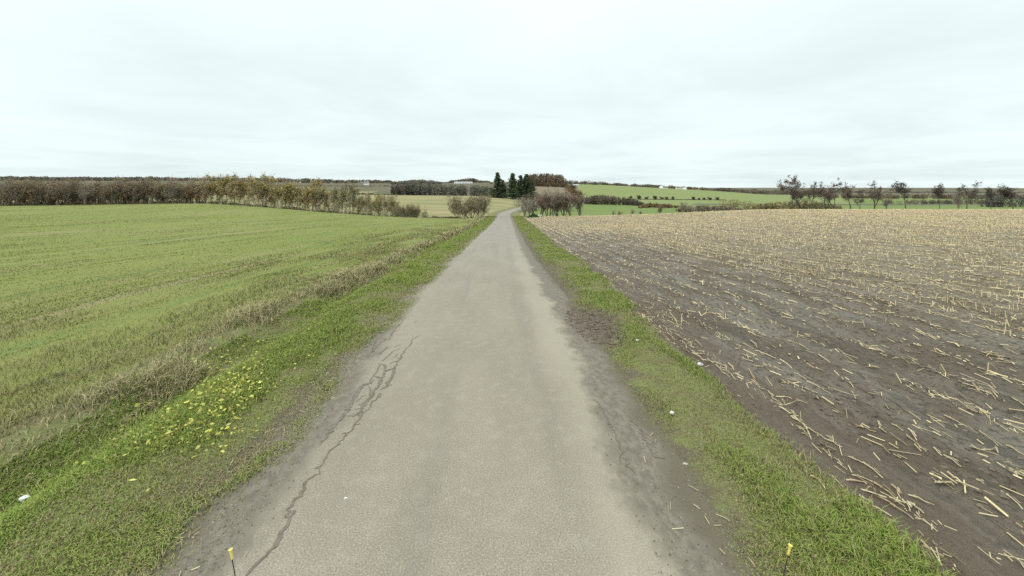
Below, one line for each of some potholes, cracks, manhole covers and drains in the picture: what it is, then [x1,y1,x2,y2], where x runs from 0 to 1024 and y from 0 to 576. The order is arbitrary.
crack [245,322,420,576]
crack [594,399,665,474]
